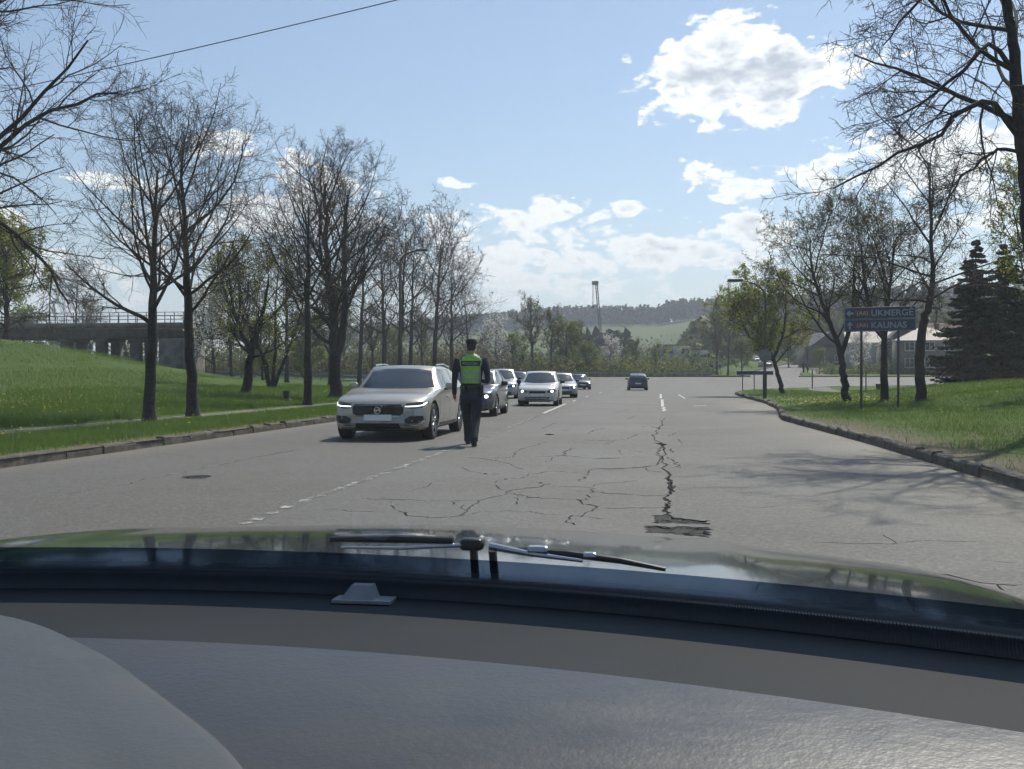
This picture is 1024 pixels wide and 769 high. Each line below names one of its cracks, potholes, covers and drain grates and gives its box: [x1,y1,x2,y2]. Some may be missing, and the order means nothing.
pothole [643,525,715,537]
pothole [652,514,711,525]
crack [323,411,681,525]
